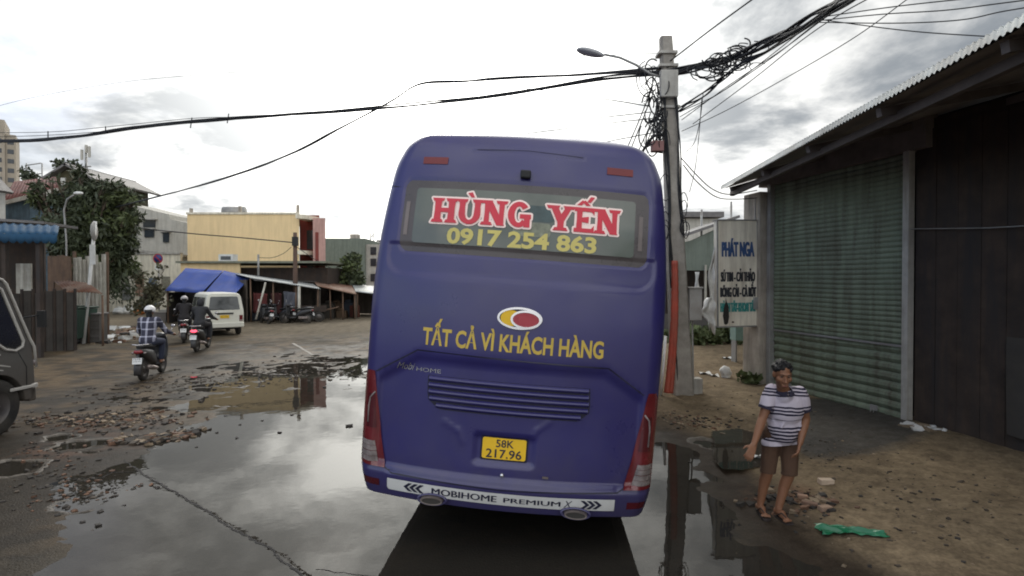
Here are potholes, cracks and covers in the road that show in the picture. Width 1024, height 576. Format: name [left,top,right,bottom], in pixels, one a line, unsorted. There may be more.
pothole [0,459,54,479]
pothole [40,433,82,442]
crack [76,459,369,576]
pothole [41,437,114,452]
pothole [45,493,104,515]
